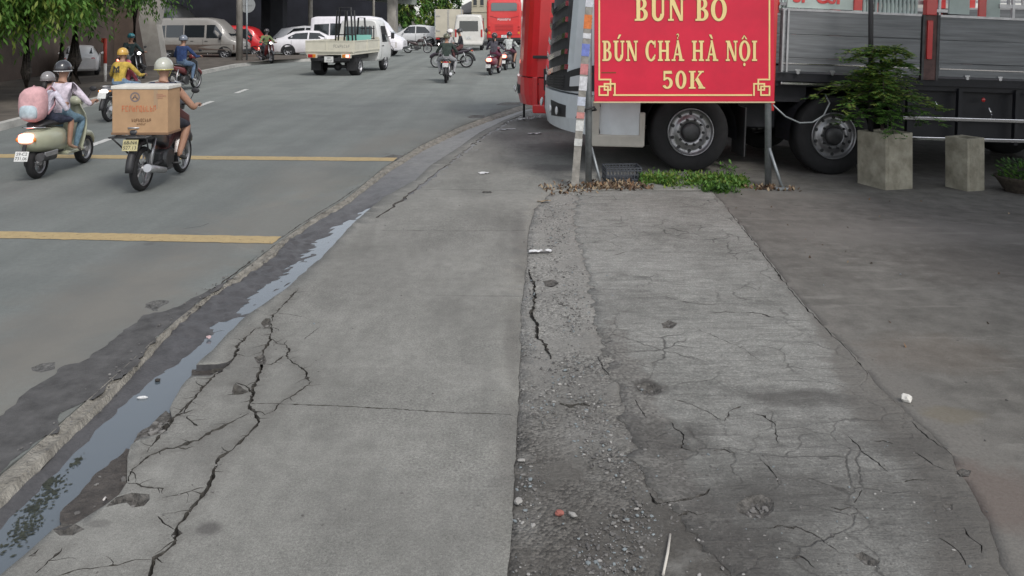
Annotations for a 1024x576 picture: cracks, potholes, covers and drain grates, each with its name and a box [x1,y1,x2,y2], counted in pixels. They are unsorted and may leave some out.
crack [768,490,862,567]
crack [30,290,322,576]
crack [528,269,552,359]
crack [650,488,710,516]
crack [847,423,946,483]
pothole [736,495,774,519]
crack [674,399,779,484]
crack [941,529,982,565]
pothole [636,383,662,395]
